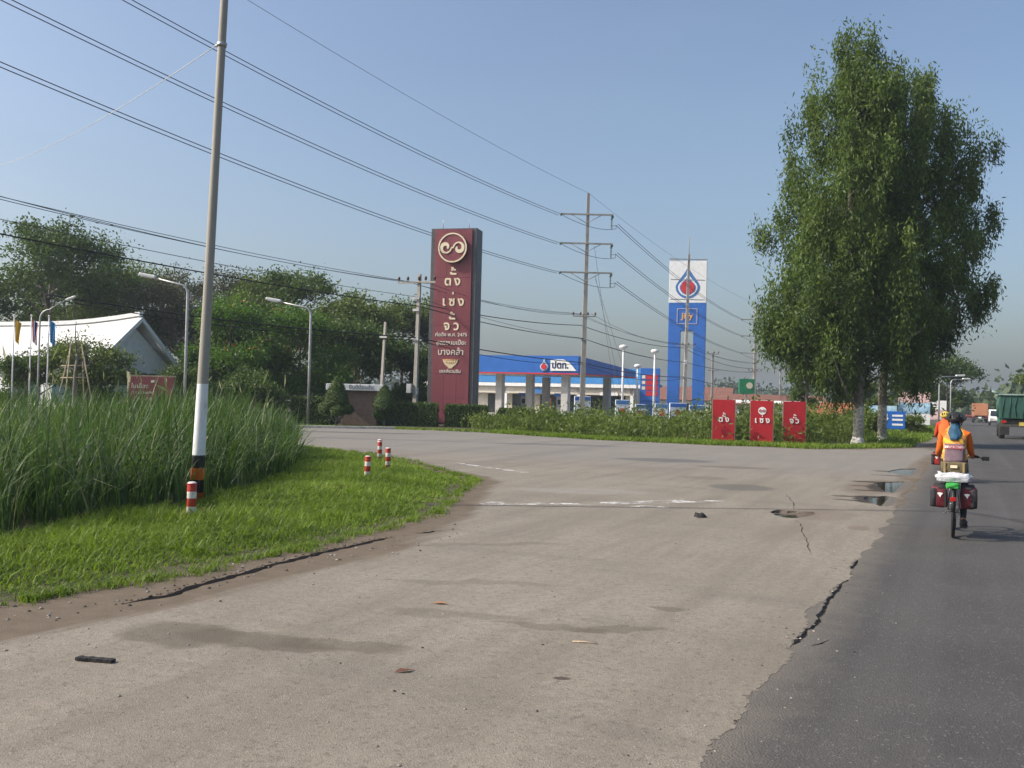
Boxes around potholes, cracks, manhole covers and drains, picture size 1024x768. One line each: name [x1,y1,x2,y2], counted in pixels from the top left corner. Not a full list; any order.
pothole [864,496,892,506]
pothole [770,510,818,518]
crack [114,536,393,605]
pothole [876,481,913,493]
